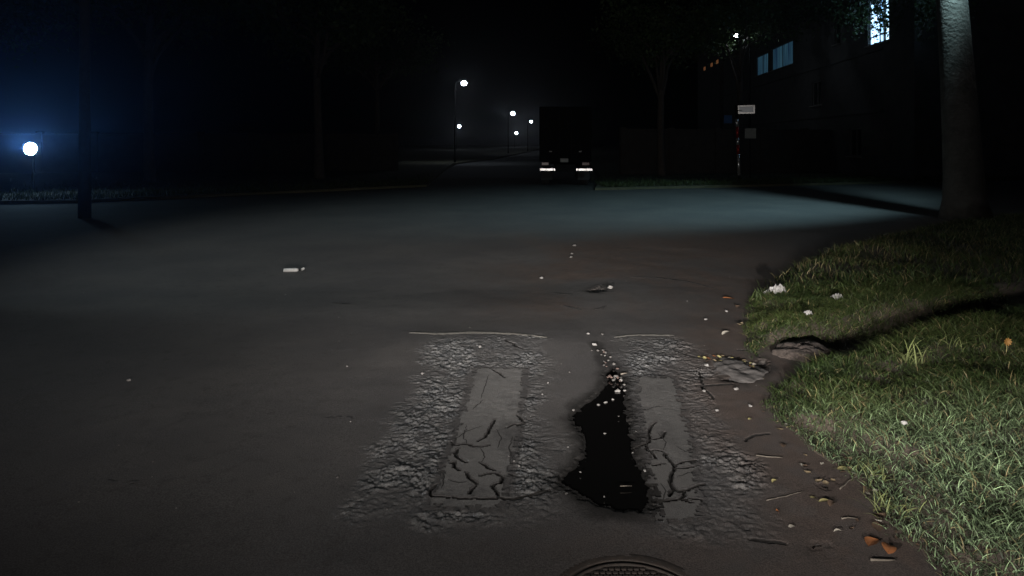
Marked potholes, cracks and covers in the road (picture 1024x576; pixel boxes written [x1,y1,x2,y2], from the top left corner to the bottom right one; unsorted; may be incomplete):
pothole [561,367,660,513]
crack [633,406,706,506]
crack [678,352,733,399]
crack [429,370,551,501]
manhole cover [560,554,690,576]
